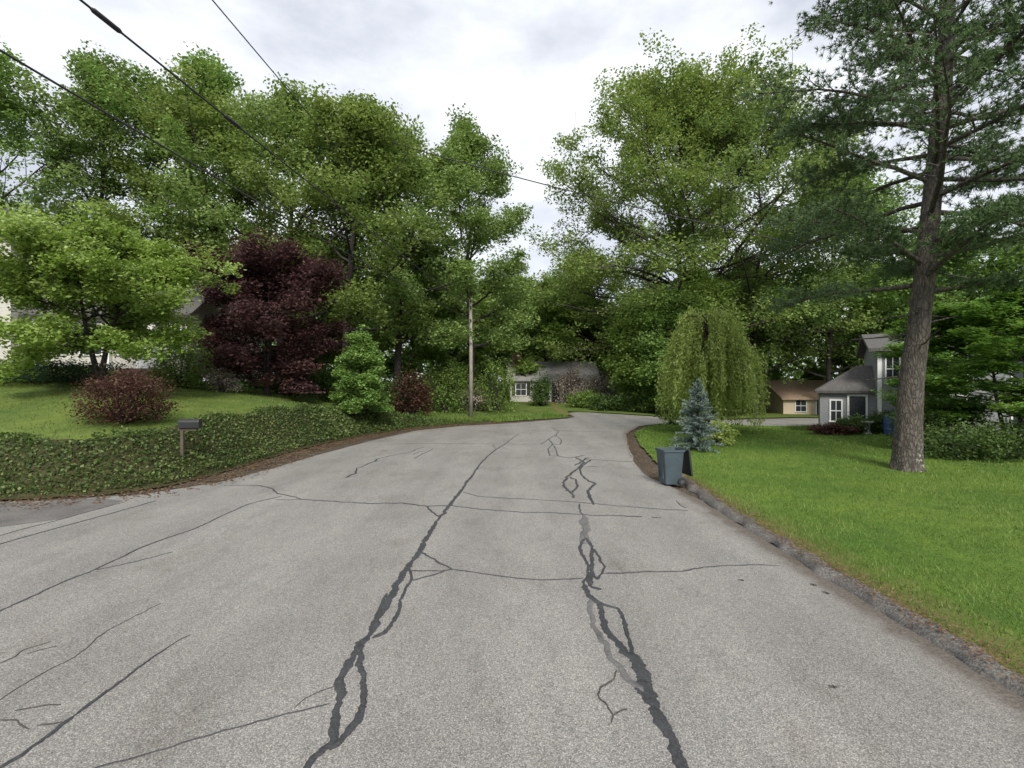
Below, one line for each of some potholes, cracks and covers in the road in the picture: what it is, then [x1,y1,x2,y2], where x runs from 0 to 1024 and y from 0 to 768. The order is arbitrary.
crack [453,564,779,580]
crack [346,443,456,478]
crack [229,485,688,518]
crack [0,501,154,544]
crack [0,603,335,768]
